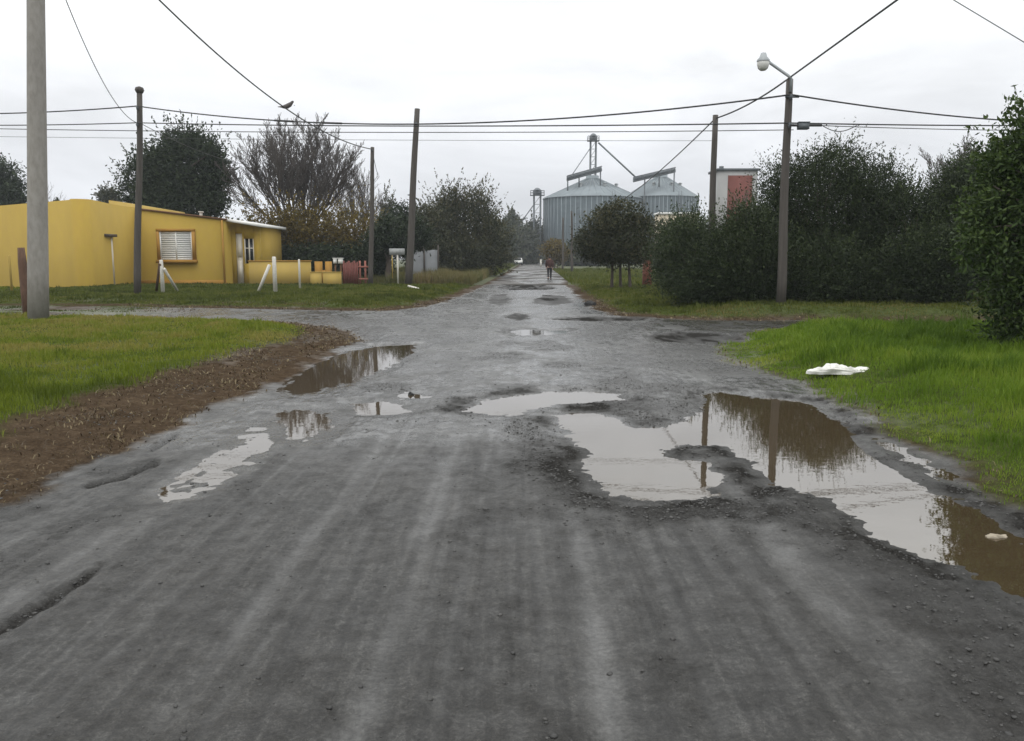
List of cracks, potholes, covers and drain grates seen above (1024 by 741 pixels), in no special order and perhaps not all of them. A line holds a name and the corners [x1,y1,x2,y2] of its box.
pothole [139,423,296,503]
pothole [330,397,425,418]
pothole [247,405,355,448]
pothole [266,343,425,396]
pothole [533,386,1024,614]
pothole [530,295,574,306]
pothole [647,331,750,344]
pothole [502,313,533,321]
pothole [500,328,580,336]
pothole [444,387,642,417]
